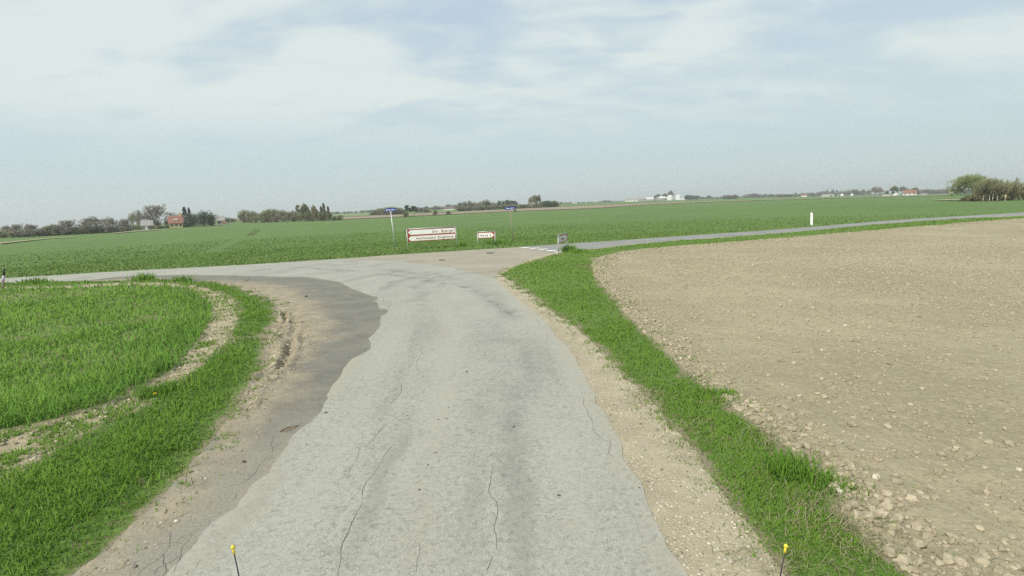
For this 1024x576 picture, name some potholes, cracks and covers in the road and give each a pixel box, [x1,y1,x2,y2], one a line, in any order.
crack [488,467,498,568]
crack [131,534,198,575]
crack [337,437,388,576]
